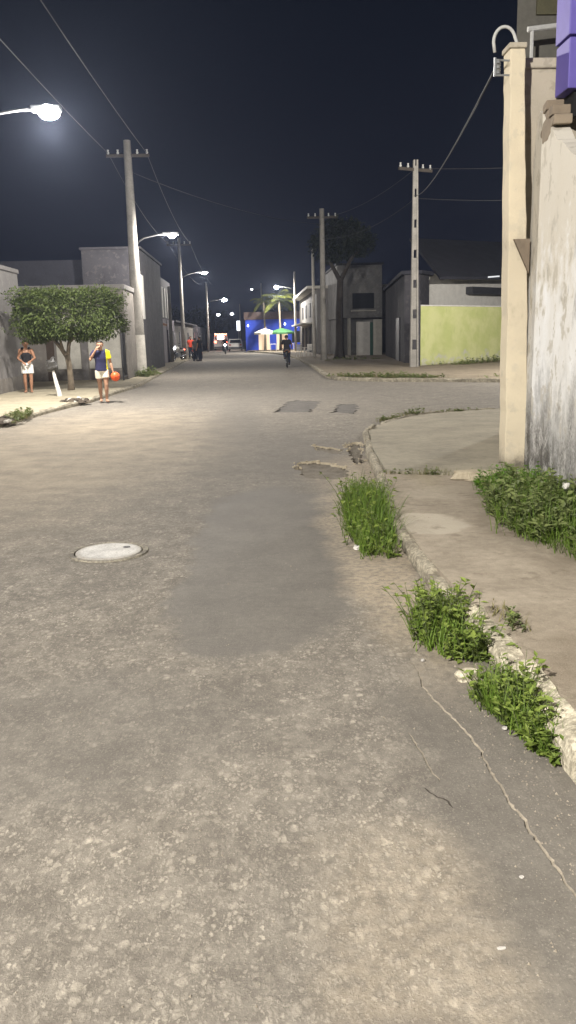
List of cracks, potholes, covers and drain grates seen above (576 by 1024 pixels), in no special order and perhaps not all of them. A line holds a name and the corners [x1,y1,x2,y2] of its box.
pothole [342,442,368,465]
pothole [292,460,351,480]
crack [409,657,576,897]
manhole cover [68,541,149,563]
pothole [311,444,344,454]
